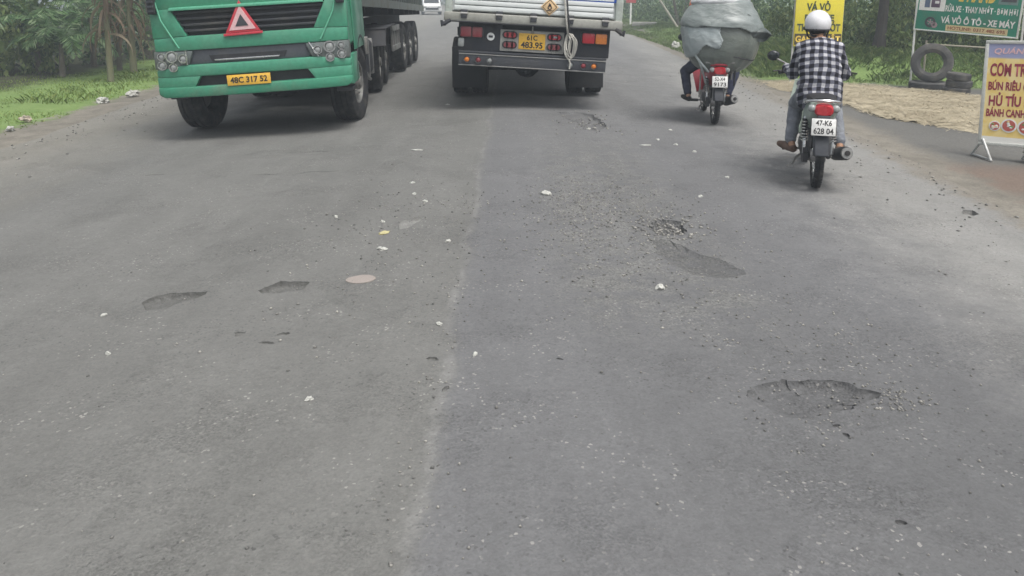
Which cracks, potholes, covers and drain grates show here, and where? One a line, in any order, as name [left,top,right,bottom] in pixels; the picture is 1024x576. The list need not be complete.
pothole [142,291,208,310]
pothole [746,379,881,419]
pothole [652,240,746,278]
pothole [559,112,606,131]
pothole [258,281,309,293]
pothole [651,219,687,236]
